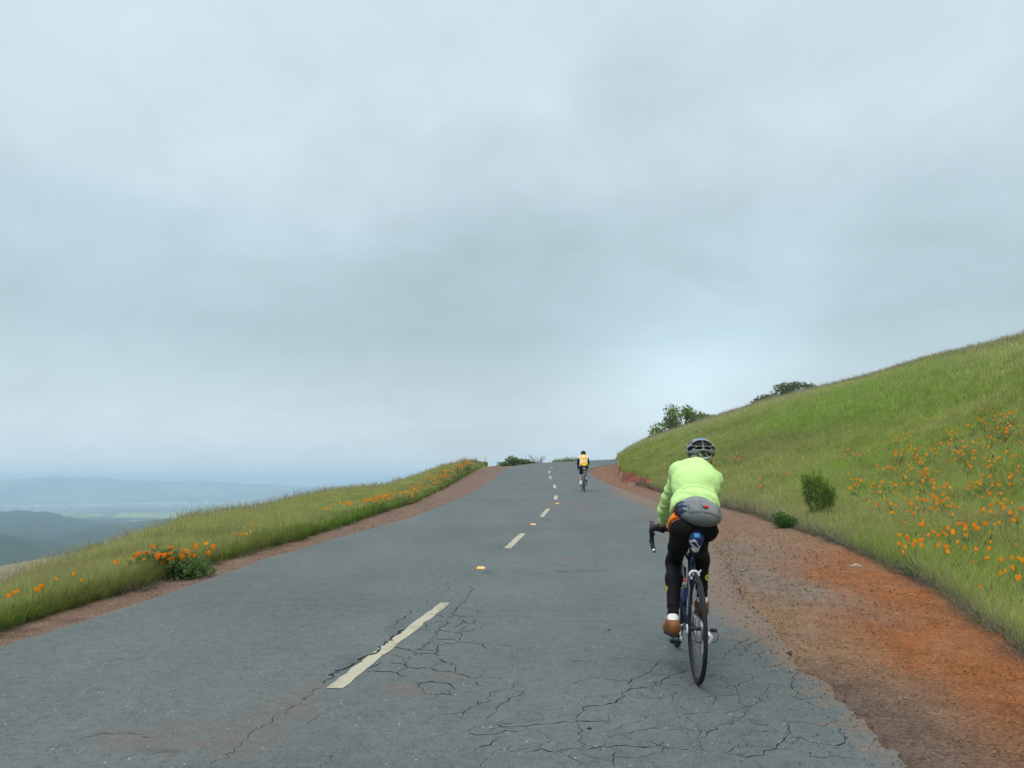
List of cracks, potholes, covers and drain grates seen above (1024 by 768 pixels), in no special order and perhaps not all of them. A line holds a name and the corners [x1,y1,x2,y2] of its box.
crack [210,580,853,768]
